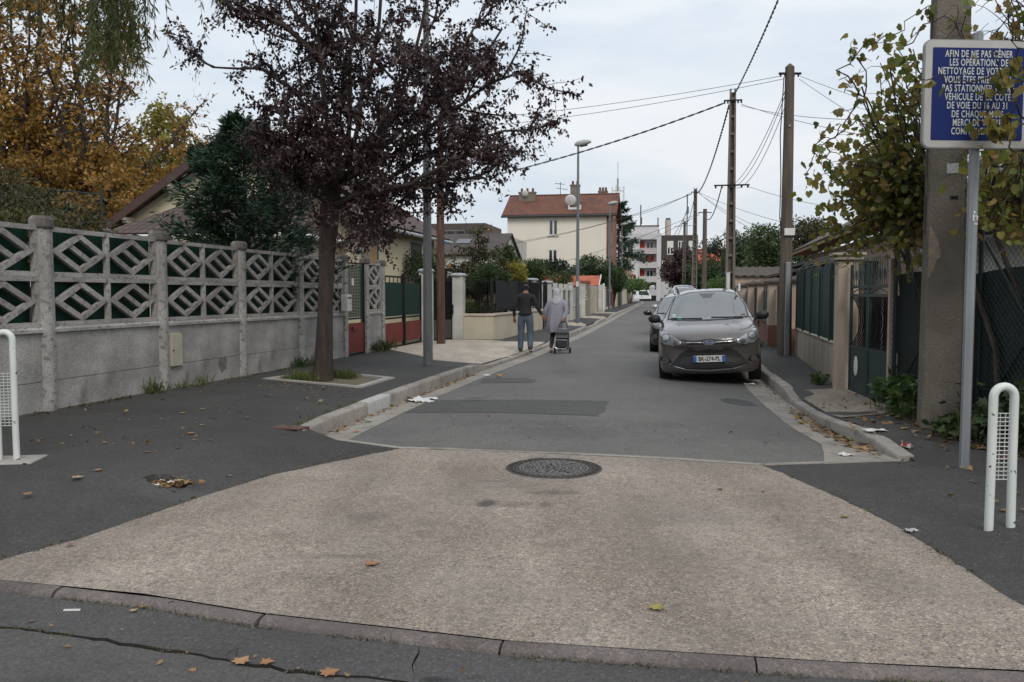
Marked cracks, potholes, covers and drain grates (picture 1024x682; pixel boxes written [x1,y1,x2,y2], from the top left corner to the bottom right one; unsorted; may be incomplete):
pothole [143,474,188,488]
crack [0,627,420,682]
manhole cover [506,458,602,479]
